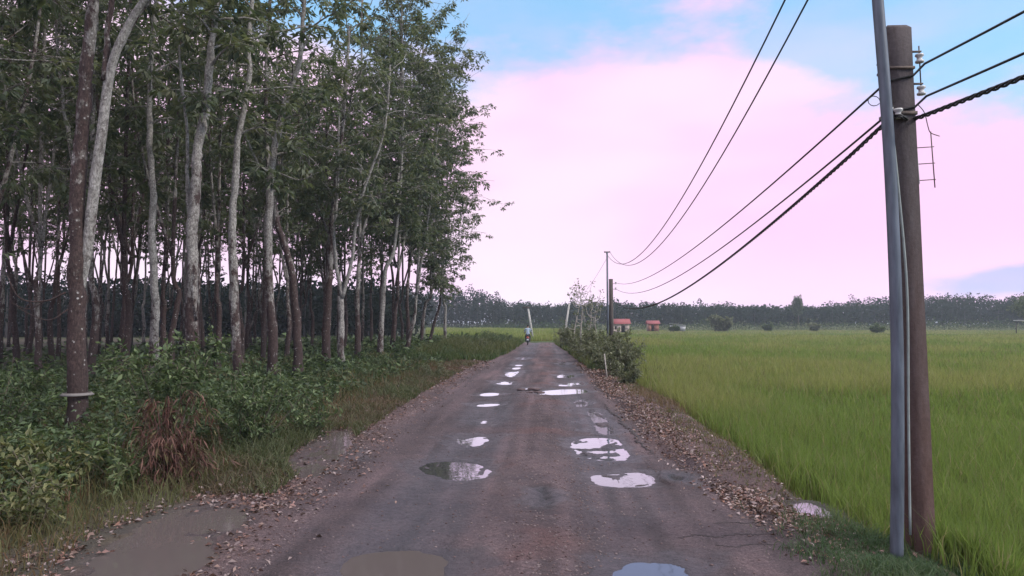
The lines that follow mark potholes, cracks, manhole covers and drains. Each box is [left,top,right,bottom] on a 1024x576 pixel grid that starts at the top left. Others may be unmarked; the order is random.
pothole [314,541,479,576]
pothole [403,458,505,483]
pothole [580,552,720,576]
pothole [29,498,268,576]
pothole [576,469,672,491]
pothole [577,408,625,437]
pothole [443,434,502,449]
crack [678,521,777,548]
pothole [557,435,641,463]
